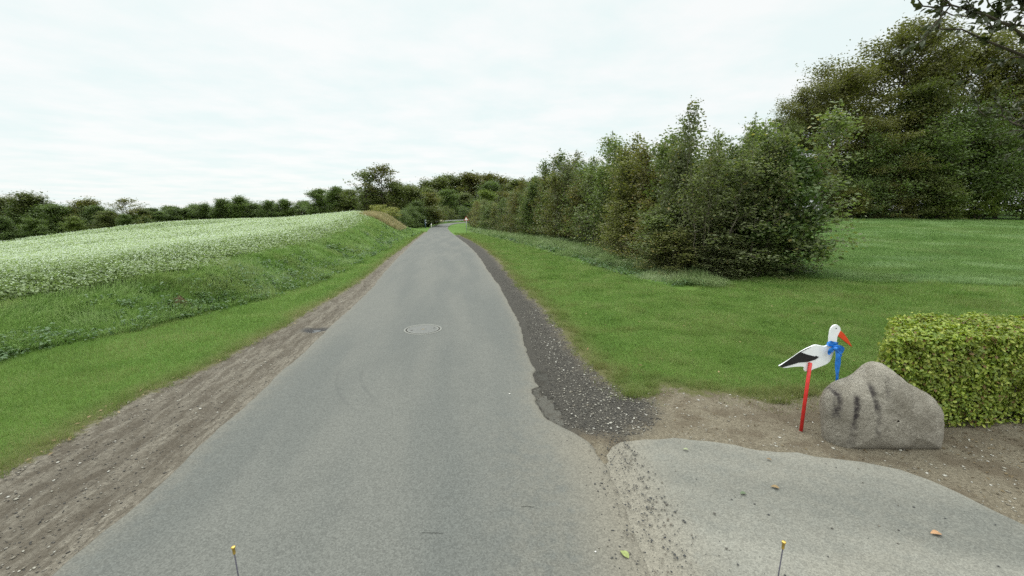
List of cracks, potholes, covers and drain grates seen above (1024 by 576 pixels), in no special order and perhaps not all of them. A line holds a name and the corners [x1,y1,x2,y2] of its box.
pothole [533,388,564,426]
manhole cover [404,324,442,335]
